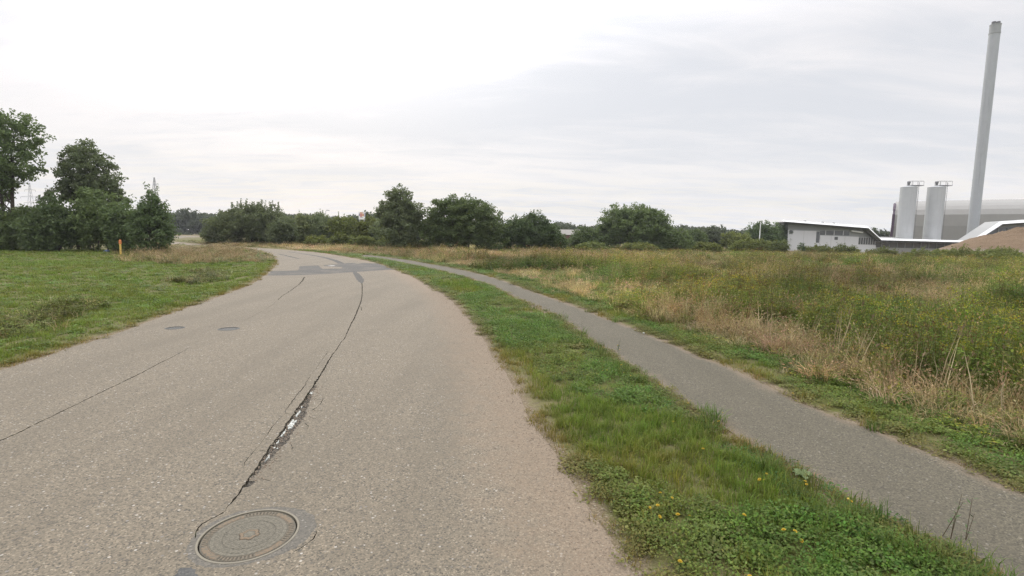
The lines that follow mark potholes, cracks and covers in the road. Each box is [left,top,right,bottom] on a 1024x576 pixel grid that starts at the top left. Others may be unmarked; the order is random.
crack [0,349,187,441]
manhole cover [186,507,317,568]
